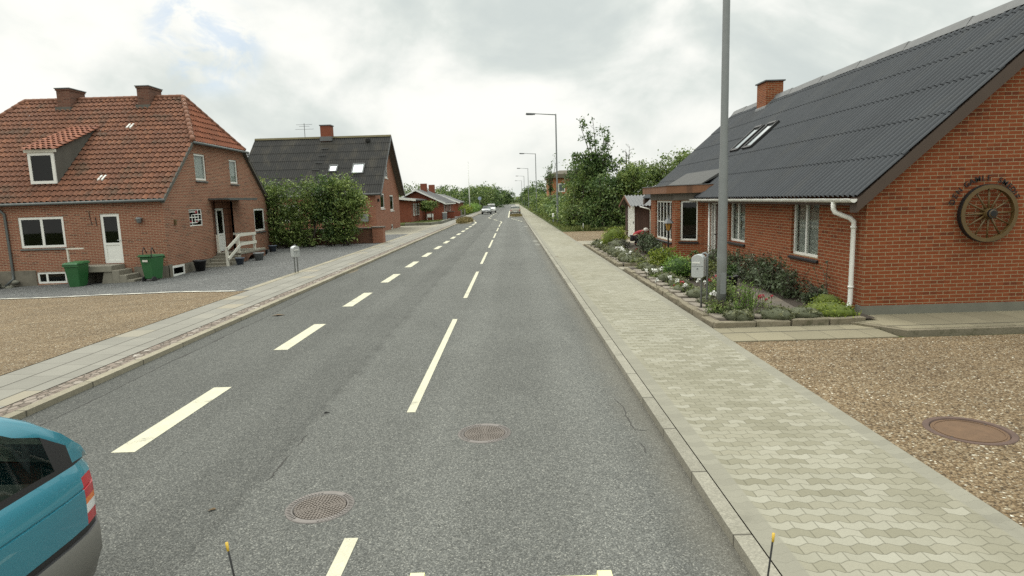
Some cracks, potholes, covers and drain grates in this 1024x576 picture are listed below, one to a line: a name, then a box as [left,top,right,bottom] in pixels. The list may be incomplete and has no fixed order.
manhole cover [458,423,511,443]
manhole cover [285,491,355,524]
manhole cover [922,416,1020,446]
